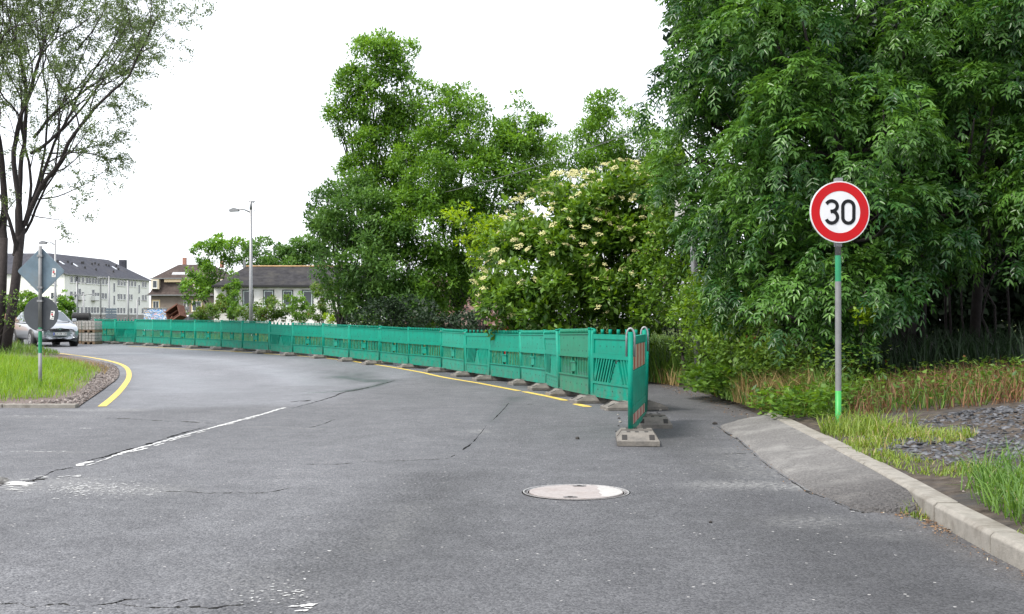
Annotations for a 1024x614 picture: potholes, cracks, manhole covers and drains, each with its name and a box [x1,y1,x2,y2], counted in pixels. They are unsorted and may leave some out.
crack [1,598,250,609]
manhole cover [522,484,630,501]
crack [22,418,206,482]
crack [336,403,529,465]
